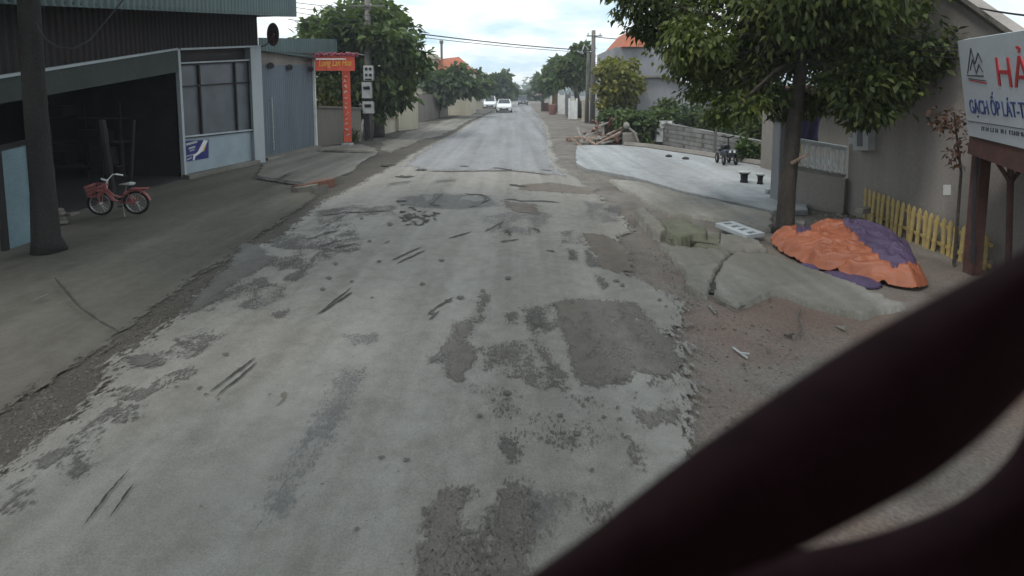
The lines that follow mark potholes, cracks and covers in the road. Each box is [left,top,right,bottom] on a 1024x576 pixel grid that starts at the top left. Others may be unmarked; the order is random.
crack [54,277,116,330]
